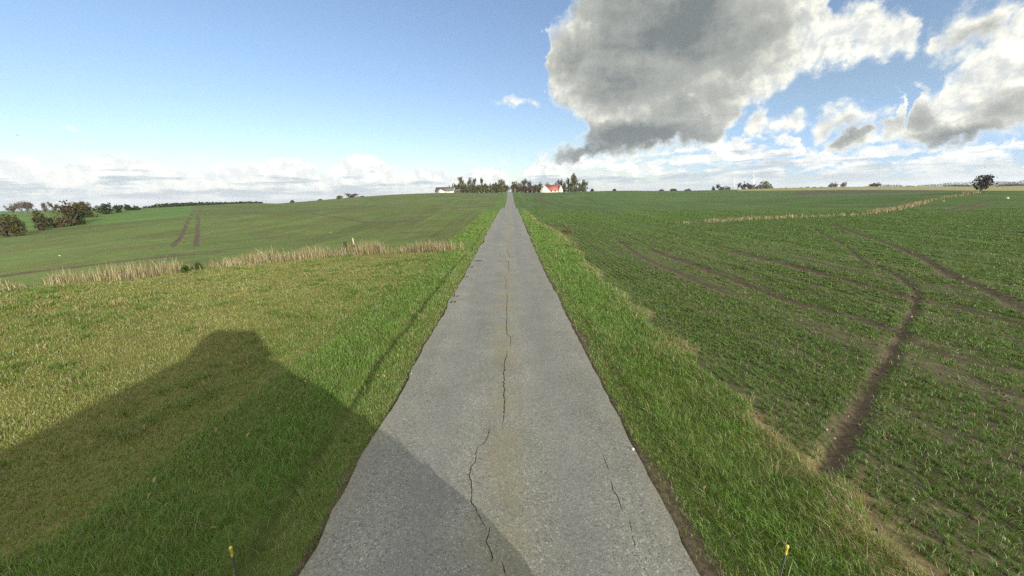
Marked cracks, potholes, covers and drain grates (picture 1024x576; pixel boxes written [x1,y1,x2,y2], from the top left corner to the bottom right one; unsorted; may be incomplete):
crack [469,249,511,574]
